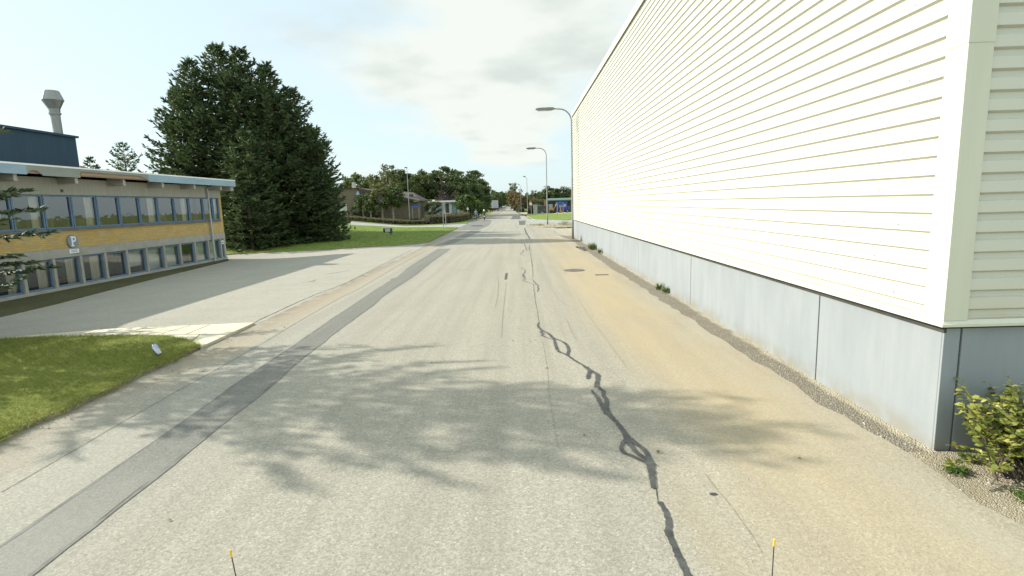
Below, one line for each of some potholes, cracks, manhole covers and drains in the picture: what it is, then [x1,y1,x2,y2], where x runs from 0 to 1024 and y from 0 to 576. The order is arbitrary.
crack [516,226,540,323]
